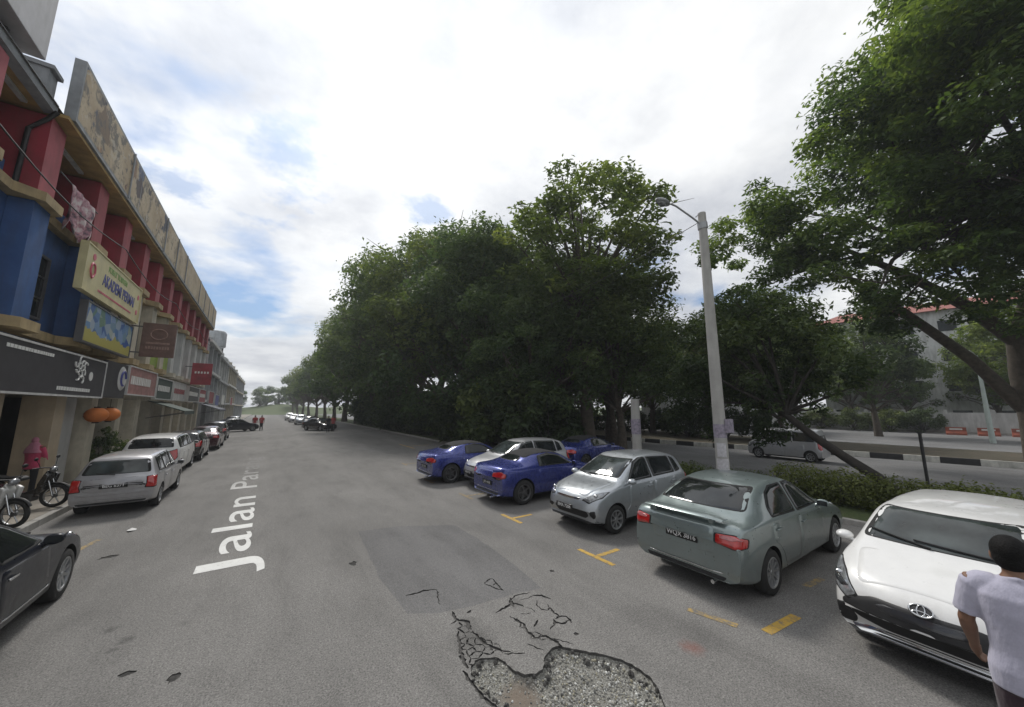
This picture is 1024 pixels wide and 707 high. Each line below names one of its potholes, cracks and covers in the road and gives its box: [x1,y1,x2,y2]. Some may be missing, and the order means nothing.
pothole [471,645,666,707]
crack [405,578,572,707]
